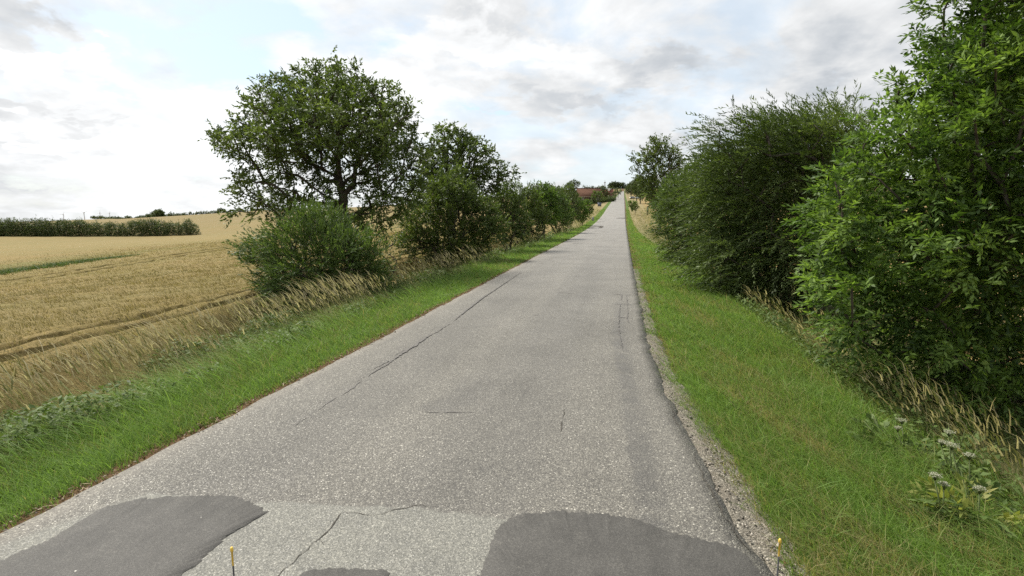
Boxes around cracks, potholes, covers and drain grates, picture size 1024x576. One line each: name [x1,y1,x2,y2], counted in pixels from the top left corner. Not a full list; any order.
crack [295,273,520,424]
crack [618,294,633,345]
crack [278,513,341,576]
